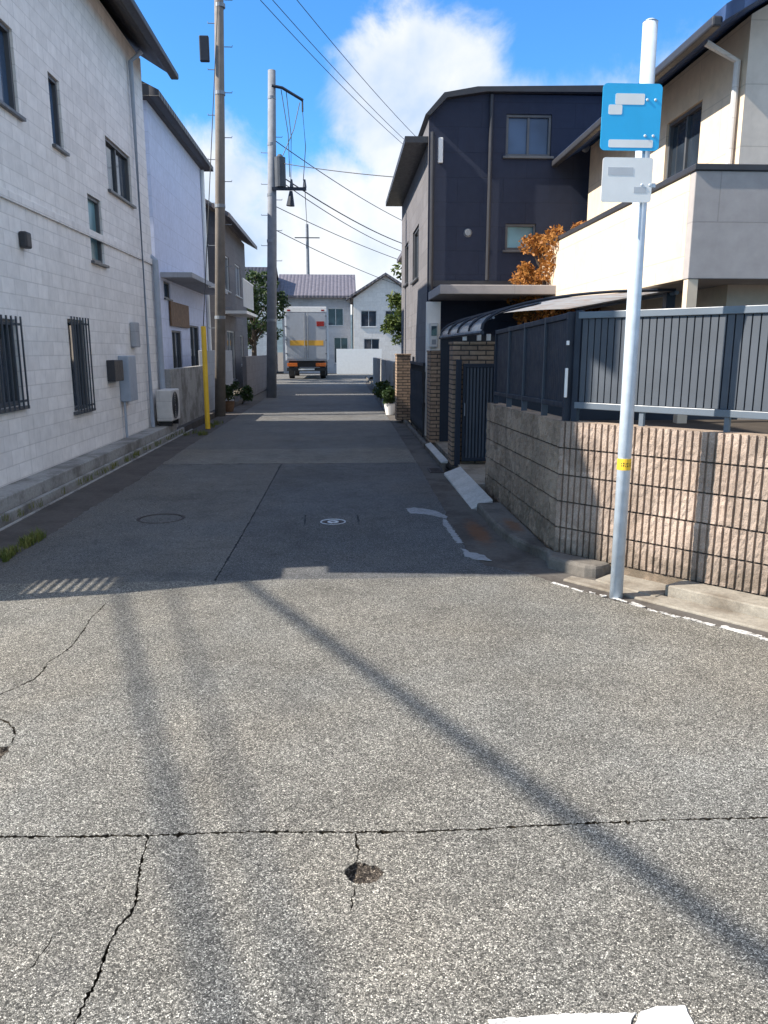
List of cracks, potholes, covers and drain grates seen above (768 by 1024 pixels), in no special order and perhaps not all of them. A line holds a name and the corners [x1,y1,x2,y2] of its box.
crack [0,803,768,1024]
pothole [344,862,385,884]
crack [0,601,109,695]
manhole cover [137,513,185,523]
